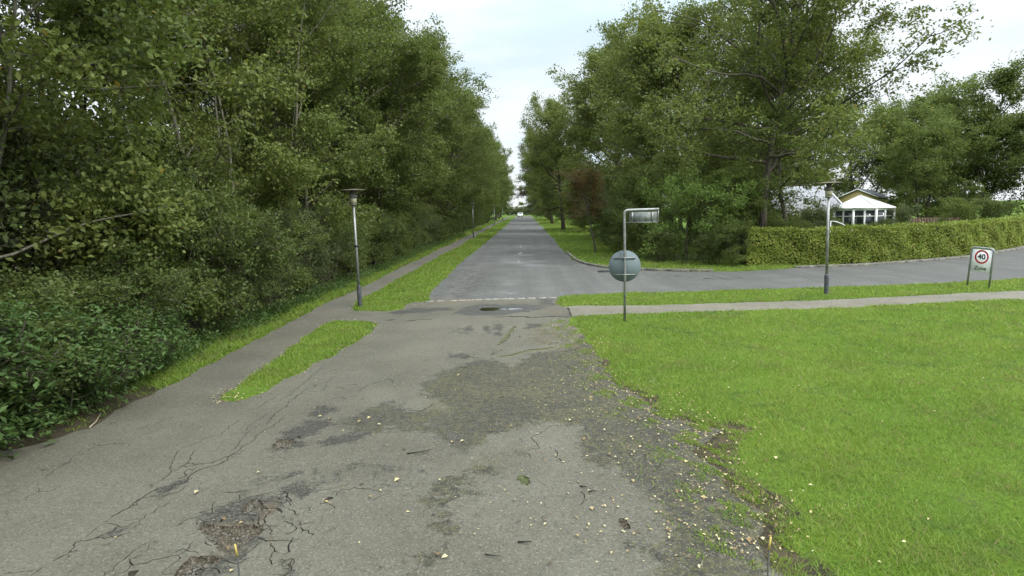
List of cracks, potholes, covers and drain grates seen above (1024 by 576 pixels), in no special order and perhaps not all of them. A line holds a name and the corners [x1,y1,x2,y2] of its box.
crack [5,367,393,576]
pothole [241,499,265,514]
pothole [174,555,222,576]
pothole [199,522,265,555]
pothole [272,438,296,451]
